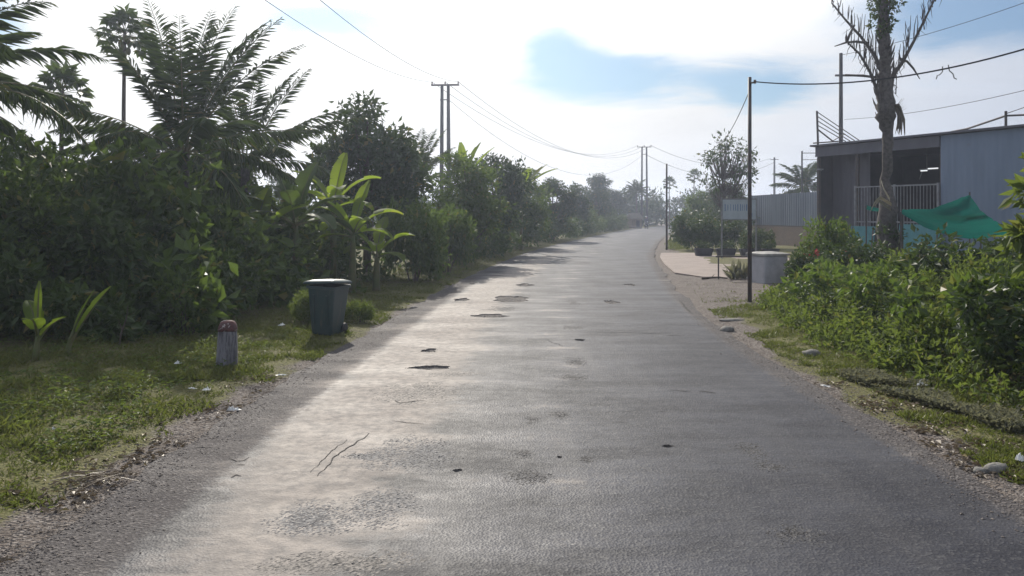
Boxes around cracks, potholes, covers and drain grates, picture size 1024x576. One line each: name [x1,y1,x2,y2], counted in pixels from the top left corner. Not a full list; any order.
crack [311,433,369,476]
